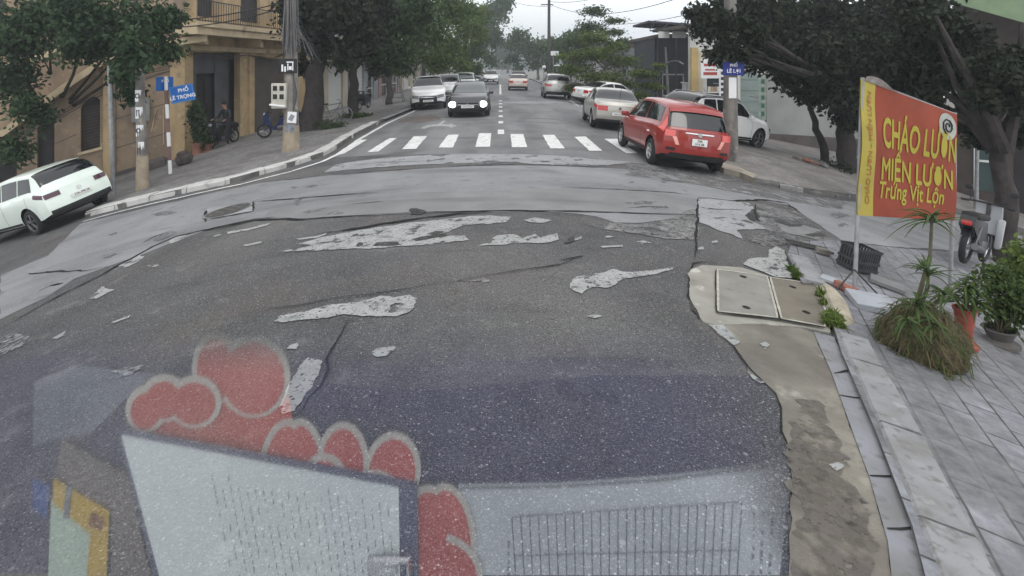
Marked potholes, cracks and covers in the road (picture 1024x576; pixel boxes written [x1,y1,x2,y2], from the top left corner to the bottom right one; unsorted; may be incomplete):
crack [450,255,583,282]
manhole cover [202,202,255,221]
crack [301,320,348,413]
